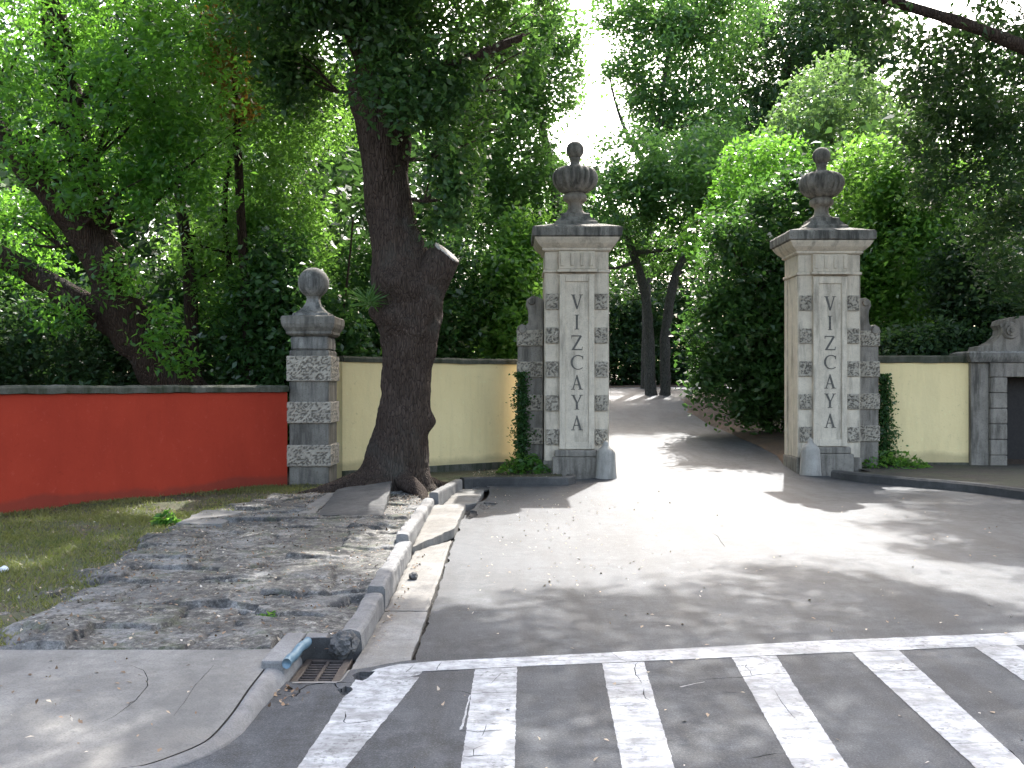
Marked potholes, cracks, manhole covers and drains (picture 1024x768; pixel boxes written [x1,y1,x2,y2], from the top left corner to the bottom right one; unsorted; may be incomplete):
drain grate [261,633,355,683]
